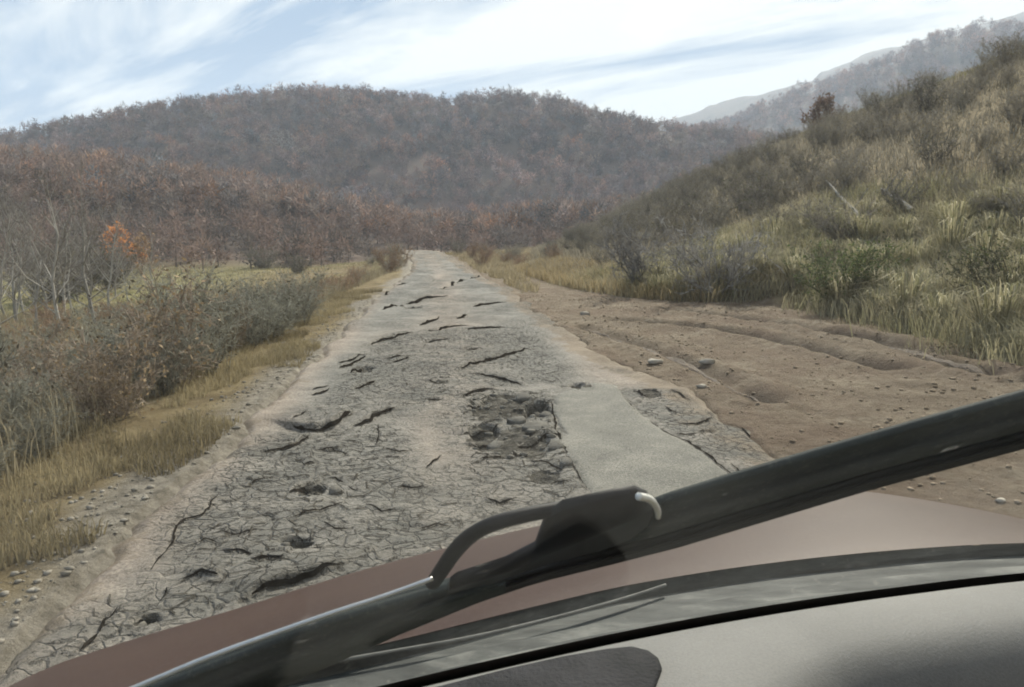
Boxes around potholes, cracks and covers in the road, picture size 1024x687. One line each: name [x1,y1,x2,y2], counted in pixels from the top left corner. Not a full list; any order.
pothole [280,540,314,549]
pothole [466,426,556,460]
crack [80,275,587,649]
pothole [471,394,550,422]
crack [624,389,750,473]
